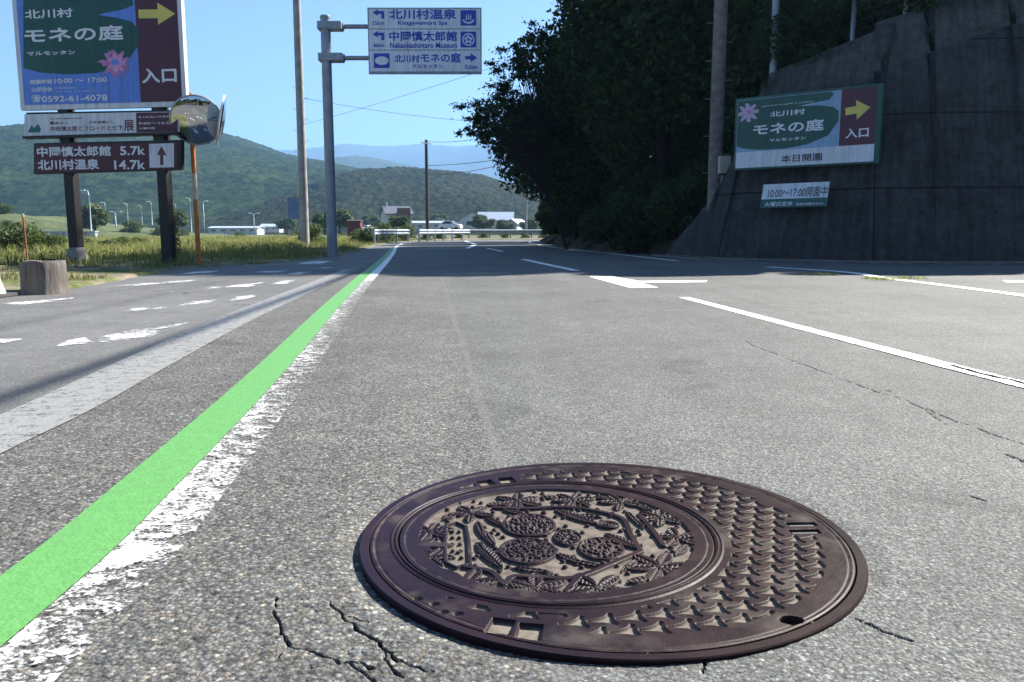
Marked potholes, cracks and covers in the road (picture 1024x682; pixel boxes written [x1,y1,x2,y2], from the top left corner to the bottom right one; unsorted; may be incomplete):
crack [272,599,397,680]
manhole cover [359,462,869,668]
